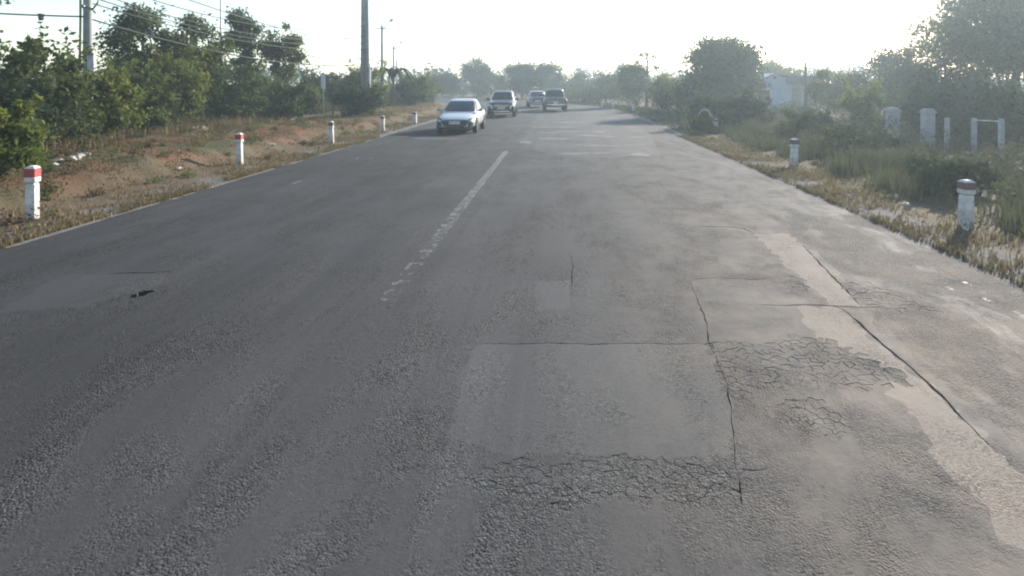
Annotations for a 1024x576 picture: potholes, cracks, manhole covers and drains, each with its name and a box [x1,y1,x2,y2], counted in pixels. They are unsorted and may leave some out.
crack [463,246,989,513]
